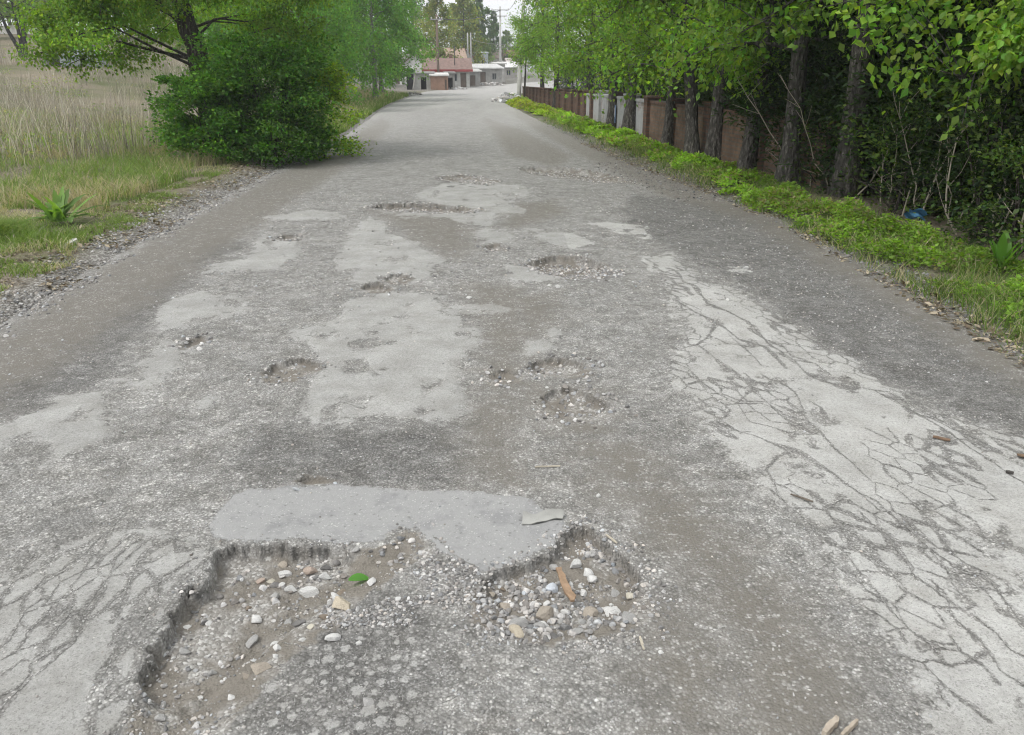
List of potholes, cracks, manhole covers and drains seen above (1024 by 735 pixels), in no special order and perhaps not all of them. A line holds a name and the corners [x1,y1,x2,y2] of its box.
pothole [373,202,480,214]
pothole [115,528,439,735]
pothole [533,383,622,424]
pothole [376,273,418,286]
pothole [522,356,597,380]
pothole [520,254,622,280]
pothole [353,280,398,295]
crack [651,255,1024,719]
pothole [174,335,209,351]
crack [0,514,214,735]
pothole [254,356,328,386]
